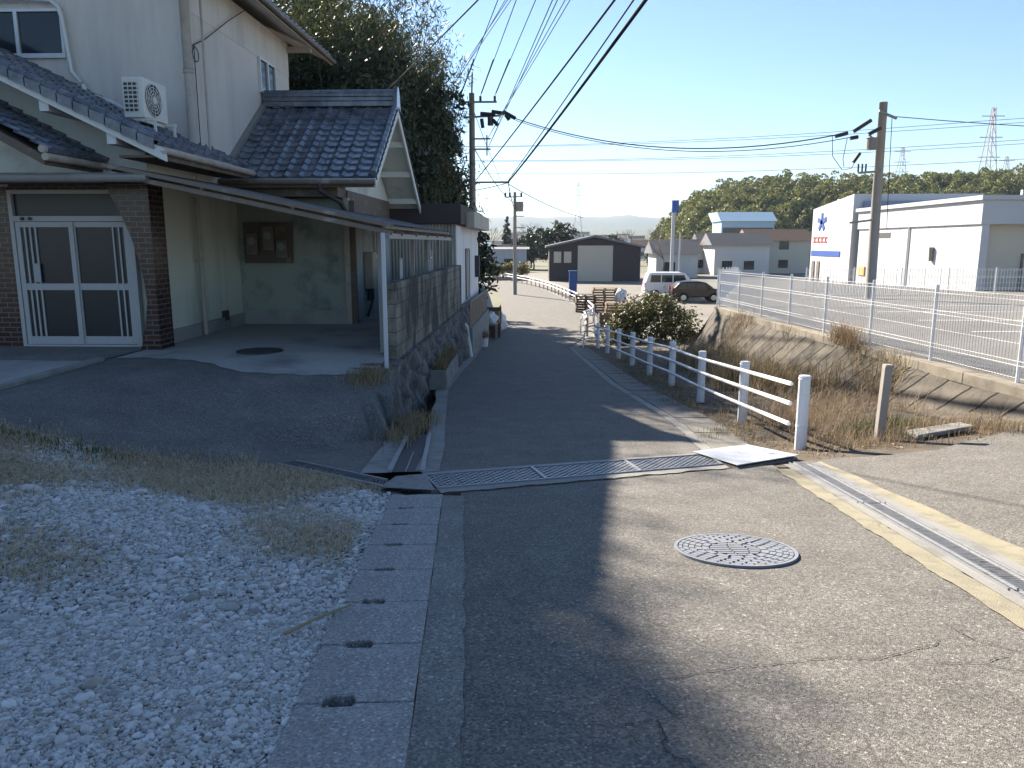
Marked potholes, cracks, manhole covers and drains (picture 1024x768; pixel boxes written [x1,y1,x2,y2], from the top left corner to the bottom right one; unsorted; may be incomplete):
drain grate [858,502,1024,591]
drain grate [789,462,886,504]
manhole cover [674,534,799,569]
drain grate [532,459,641,480]
drain grate [425,466,546,490]
manhole cover [236,347,283,355]
drain grate [277,460,388,489]
drain grate [625,454,723,472]
